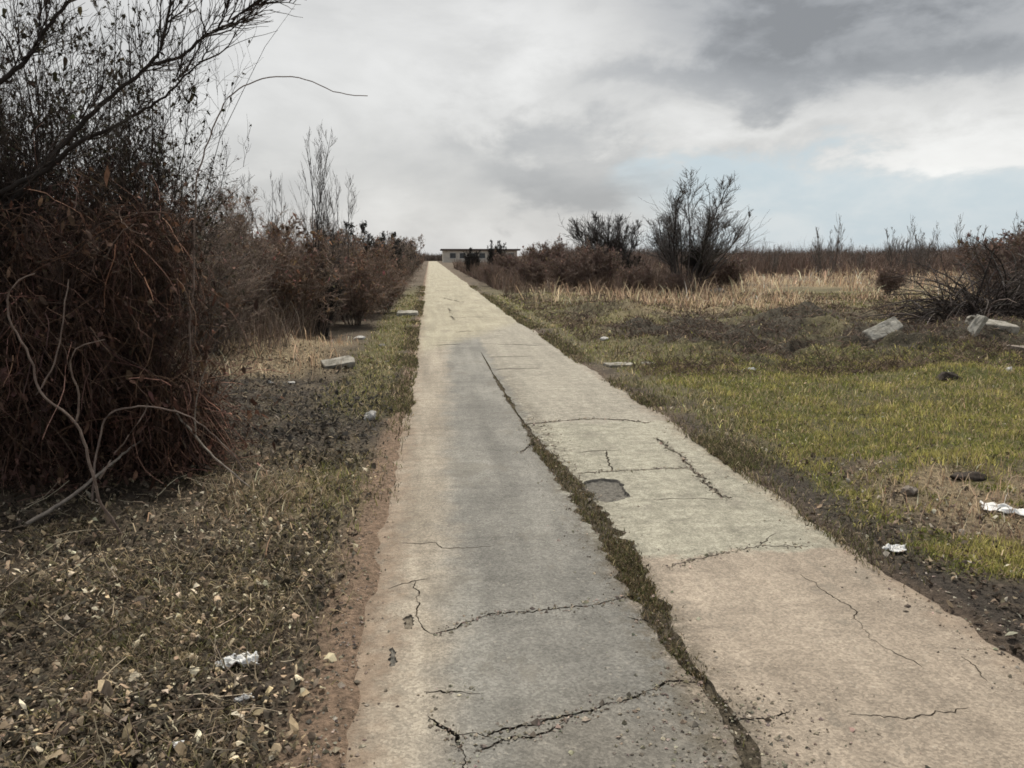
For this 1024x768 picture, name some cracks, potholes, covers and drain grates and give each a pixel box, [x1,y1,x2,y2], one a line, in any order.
pothole [581,478,631,502]
pothole [402,614,415,629]
crack [389,344,790,768]
crack [800,574,922,667]
crack [852,708,966,720]
pothole [388,647,398,667]
